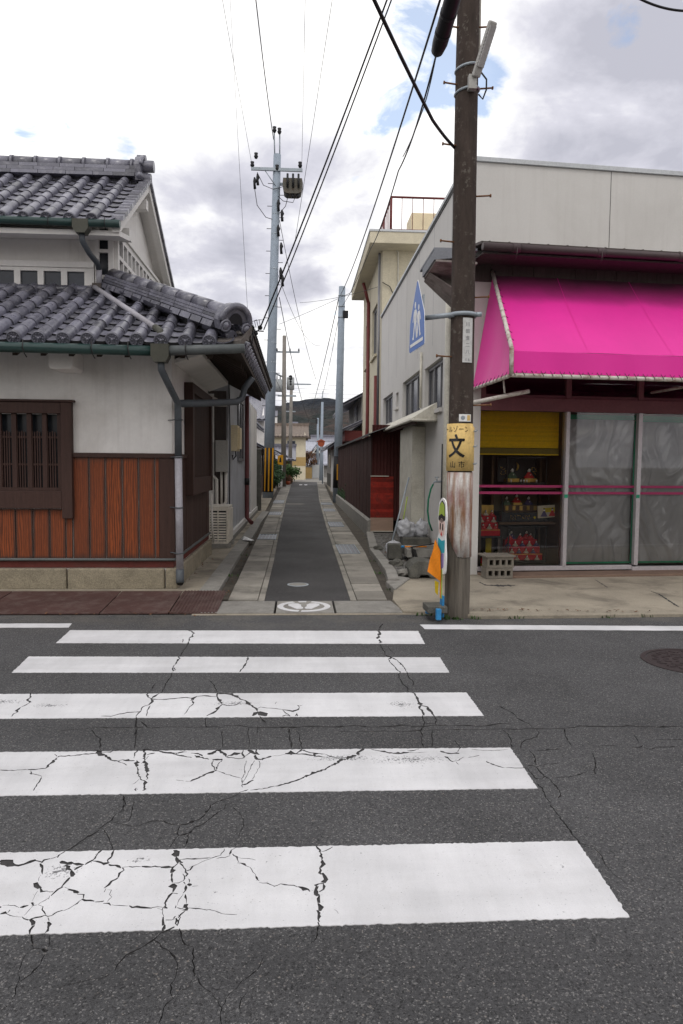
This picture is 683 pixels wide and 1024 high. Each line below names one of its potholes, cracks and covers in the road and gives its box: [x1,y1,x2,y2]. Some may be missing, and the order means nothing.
drain grate [336,544,360,554]
manhole cover [640,648,683,673]
crack [0,624,683,1024]
